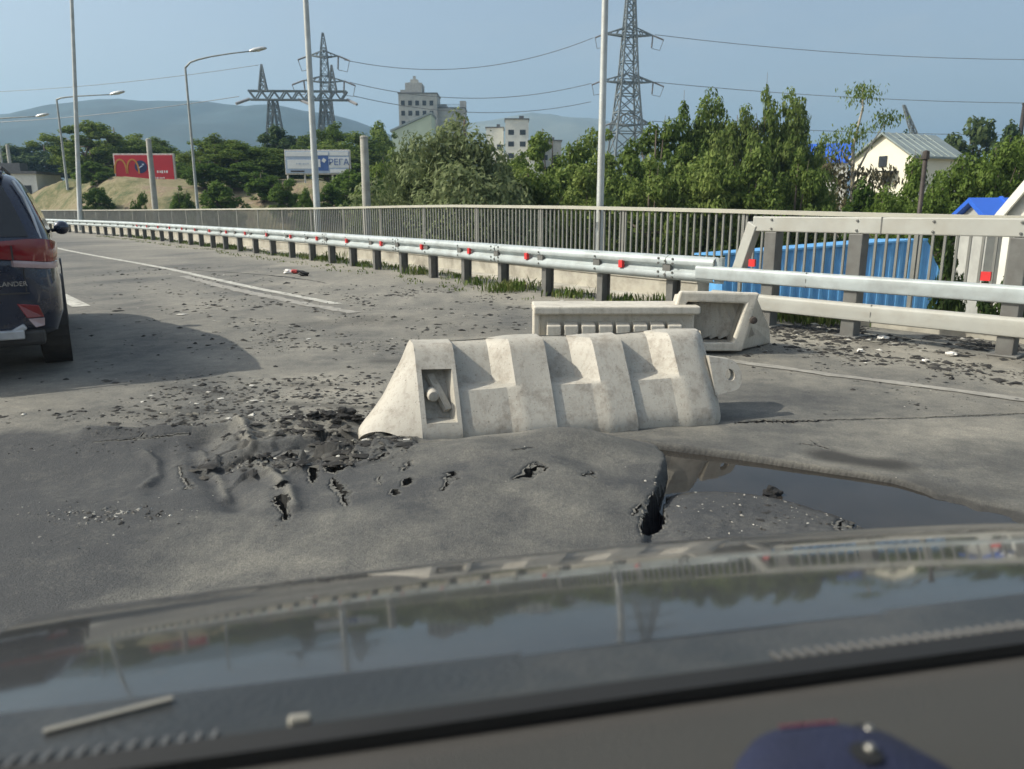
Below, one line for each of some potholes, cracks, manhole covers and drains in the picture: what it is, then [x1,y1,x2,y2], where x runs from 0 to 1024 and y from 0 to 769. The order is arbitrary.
pothole [638,479,669,540]
pothole [307,465,321,484]
crack [735,413,1024,451]
pothole [322,460,354,475]
pothole [272,492,291,521]
